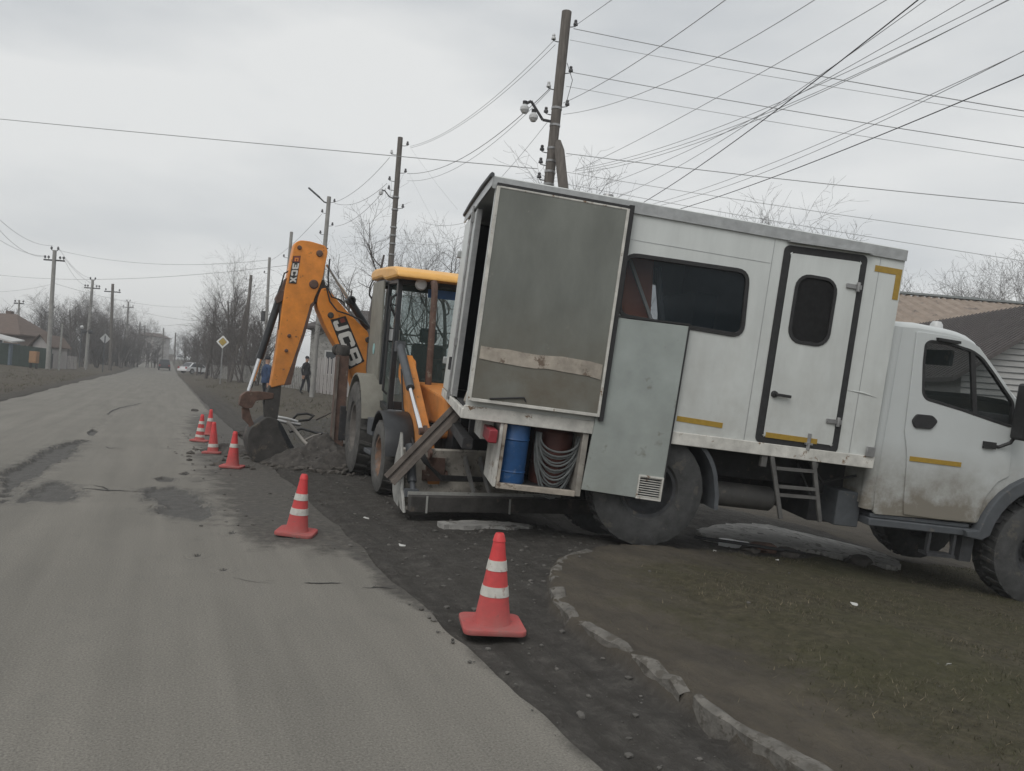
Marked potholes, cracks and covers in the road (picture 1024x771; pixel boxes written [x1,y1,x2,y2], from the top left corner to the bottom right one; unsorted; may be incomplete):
pothole [0,439,92,505]
pothole [83,428,102,436]
